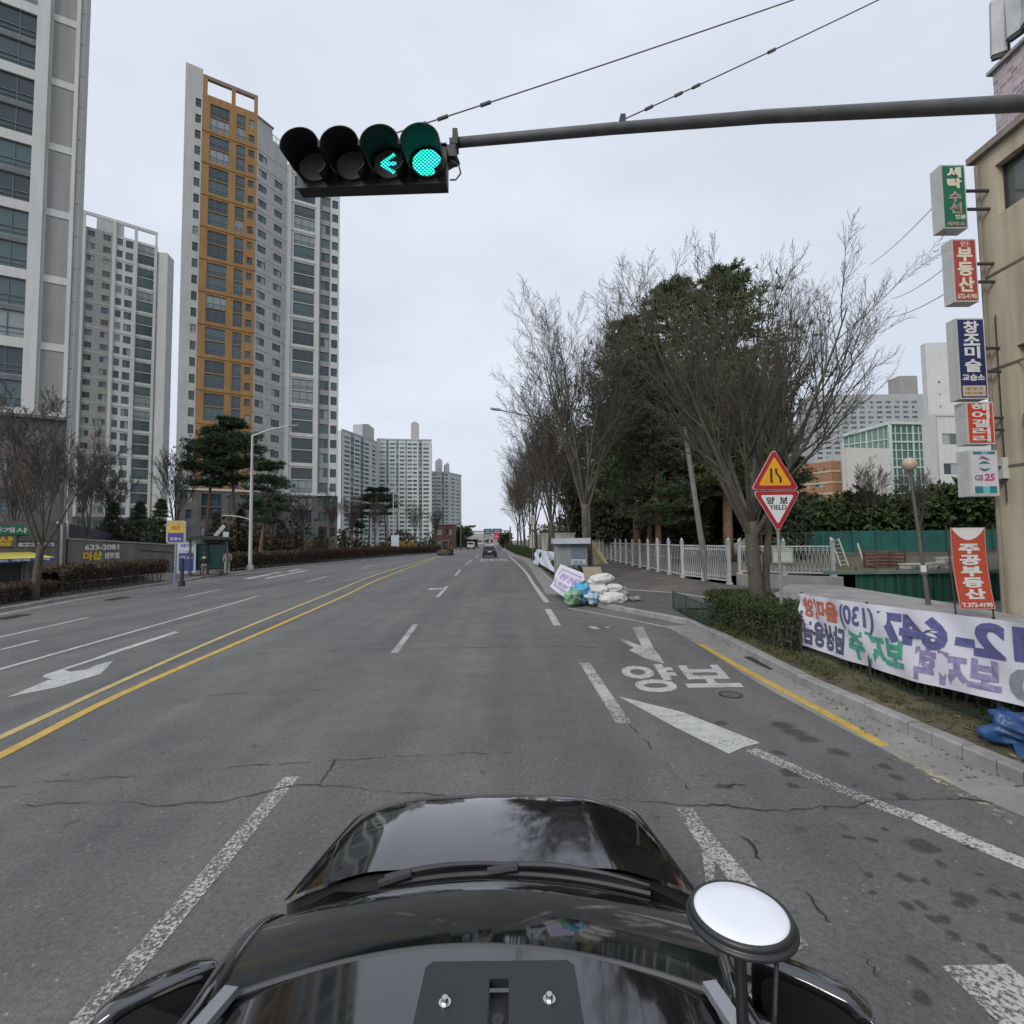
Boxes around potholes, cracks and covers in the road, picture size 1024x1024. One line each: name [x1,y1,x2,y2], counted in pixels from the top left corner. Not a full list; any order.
crack [5,725,993,811]
crack [740,835,832,923]
